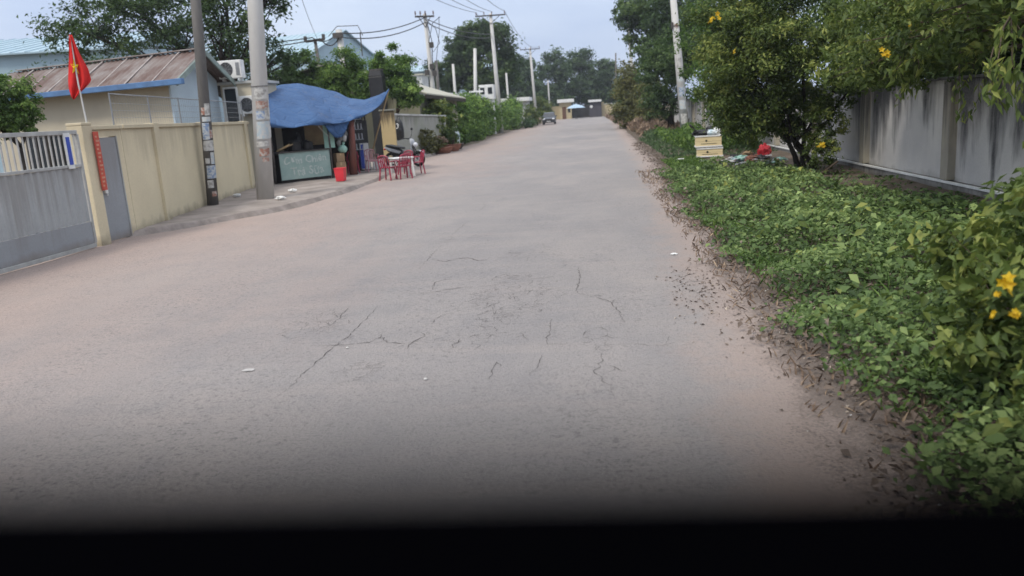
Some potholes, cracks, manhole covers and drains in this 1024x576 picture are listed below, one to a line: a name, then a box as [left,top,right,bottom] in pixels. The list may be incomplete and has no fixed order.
crack [282,206,674,394]
